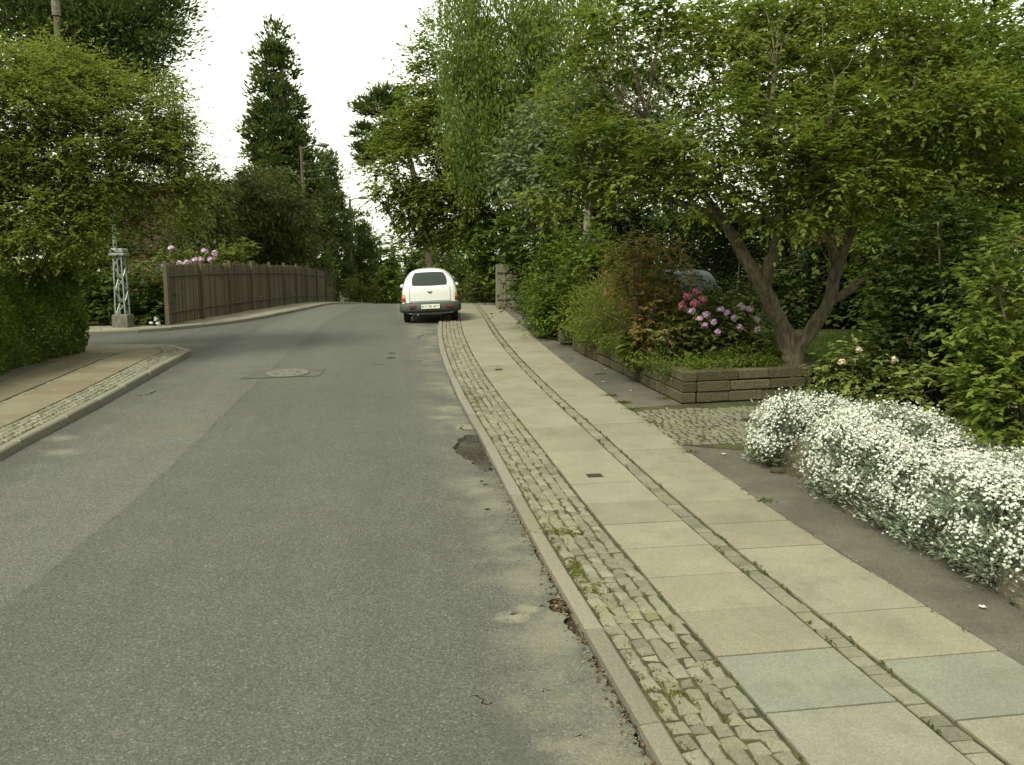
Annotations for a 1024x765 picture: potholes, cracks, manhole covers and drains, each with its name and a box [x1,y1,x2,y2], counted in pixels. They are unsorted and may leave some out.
pothole [453,435,493,472]
manhole cover [240,368,326,379]
pothole [547,599,570,614]
